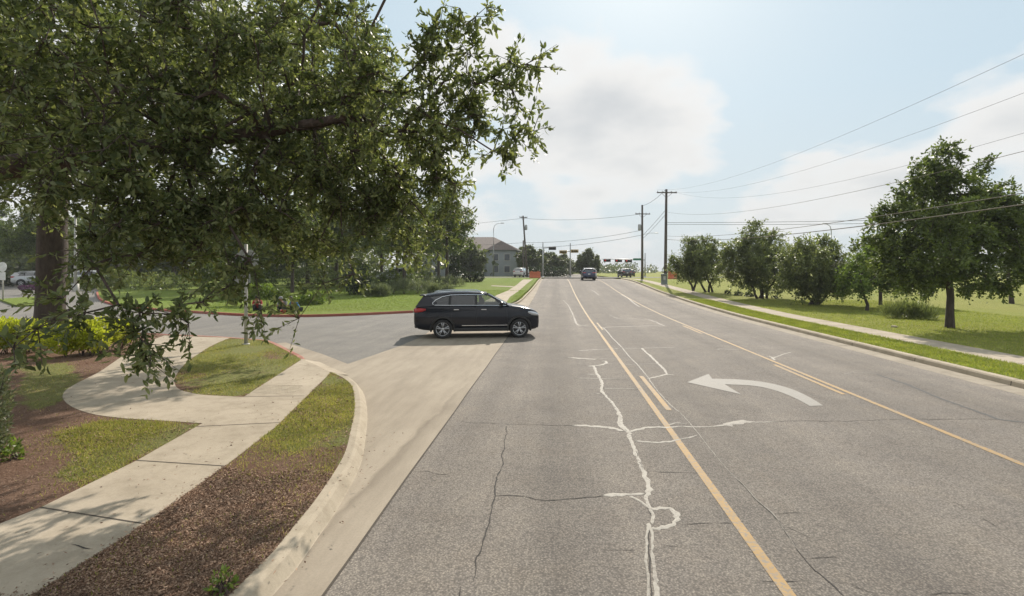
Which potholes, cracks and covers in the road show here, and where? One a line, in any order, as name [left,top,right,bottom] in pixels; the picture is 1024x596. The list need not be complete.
crack [459,422,600,596]
